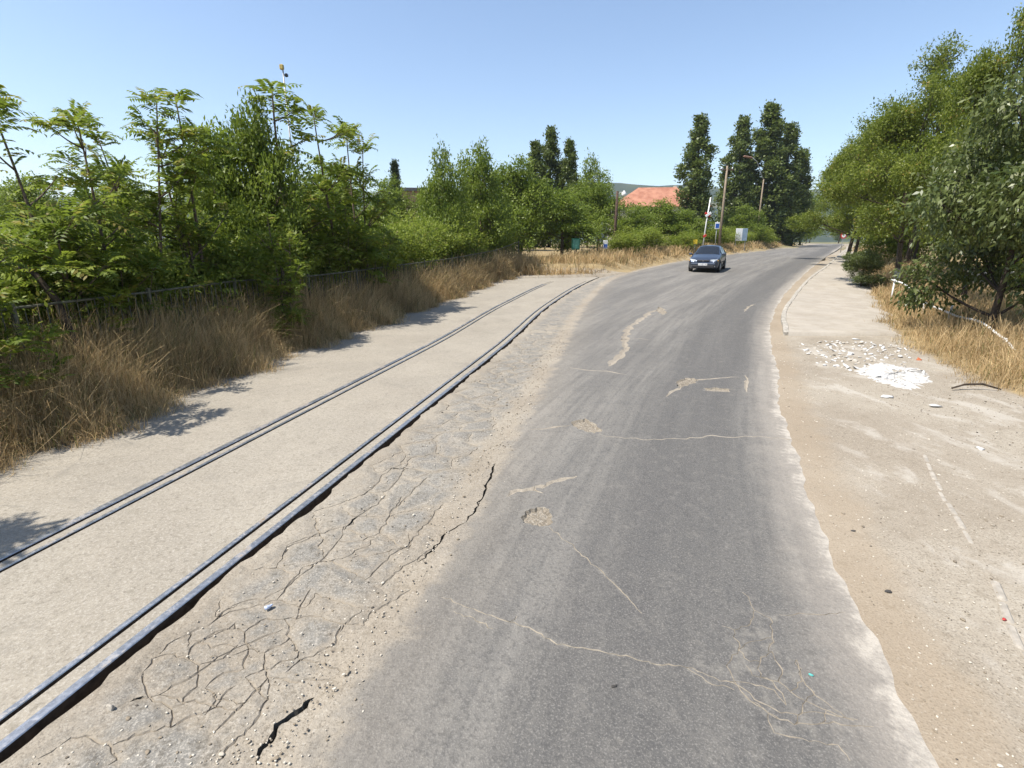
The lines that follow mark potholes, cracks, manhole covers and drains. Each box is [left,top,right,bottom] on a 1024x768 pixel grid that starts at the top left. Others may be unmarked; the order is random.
crack [36,325,577,766]
crack [442,592,873,761]
crack [570,310,656,375]
crack [549,527,640,612]
pothole [521,507,553,526]
pothole [571,419,602,433]
crack [666,376,749,397]
